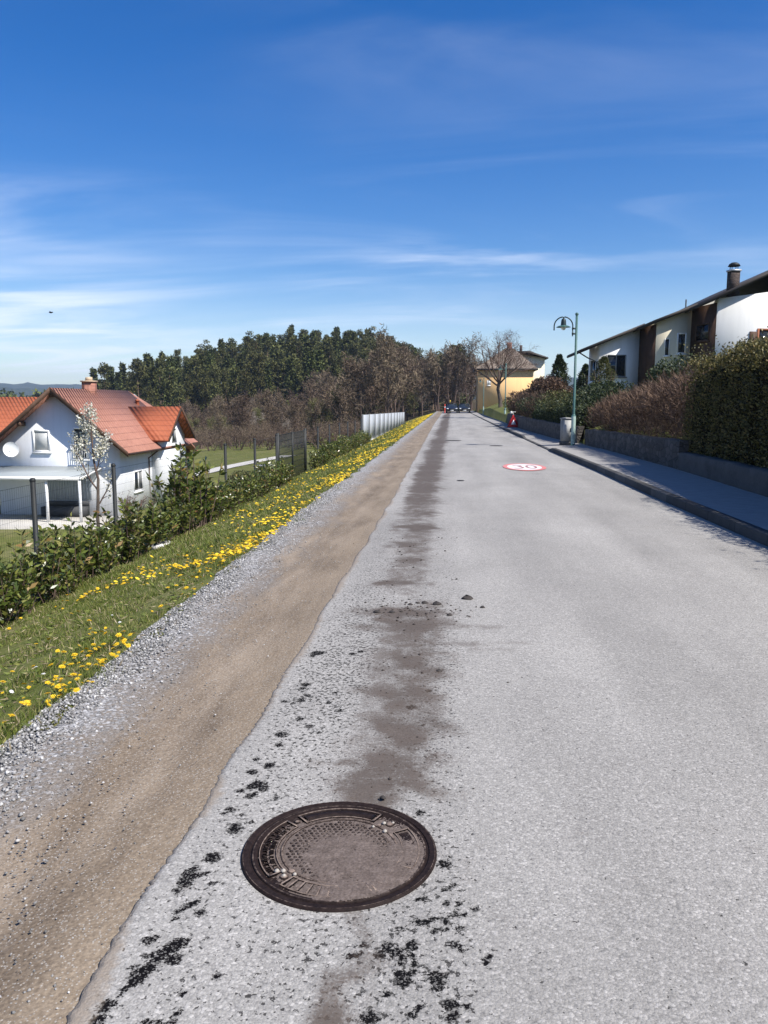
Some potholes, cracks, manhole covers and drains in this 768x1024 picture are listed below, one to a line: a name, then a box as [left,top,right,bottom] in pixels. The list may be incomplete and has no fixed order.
manhole cover [241,801,437,913]
